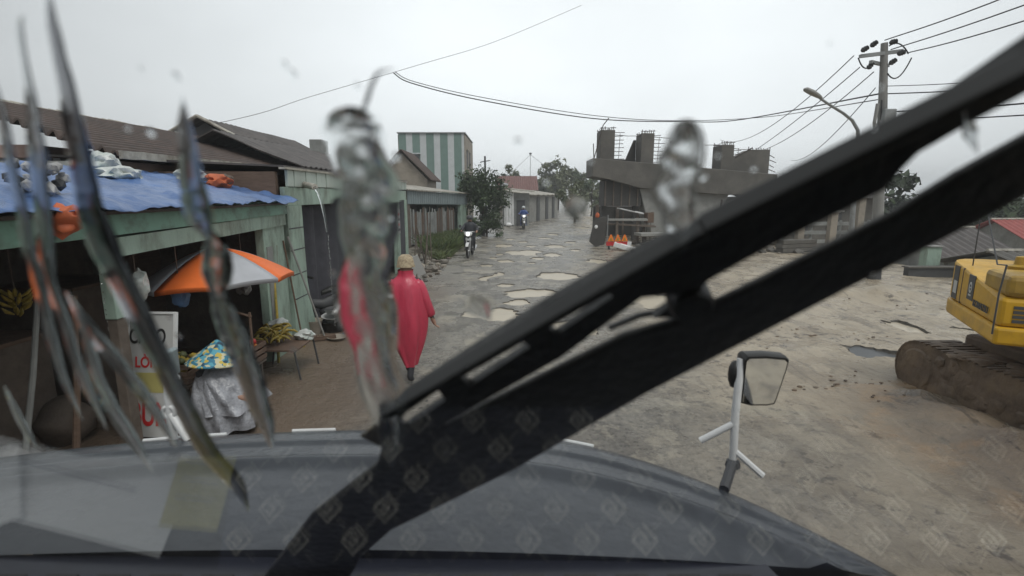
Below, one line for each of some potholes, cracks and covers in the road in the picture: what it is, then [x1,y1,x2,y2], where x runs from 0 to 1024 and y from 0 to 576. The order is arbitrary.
pothole [840,344,897,358]
pothole [460,307,519,321]
pothole [503,288,555,298]
pothole [535,272,581,280]
